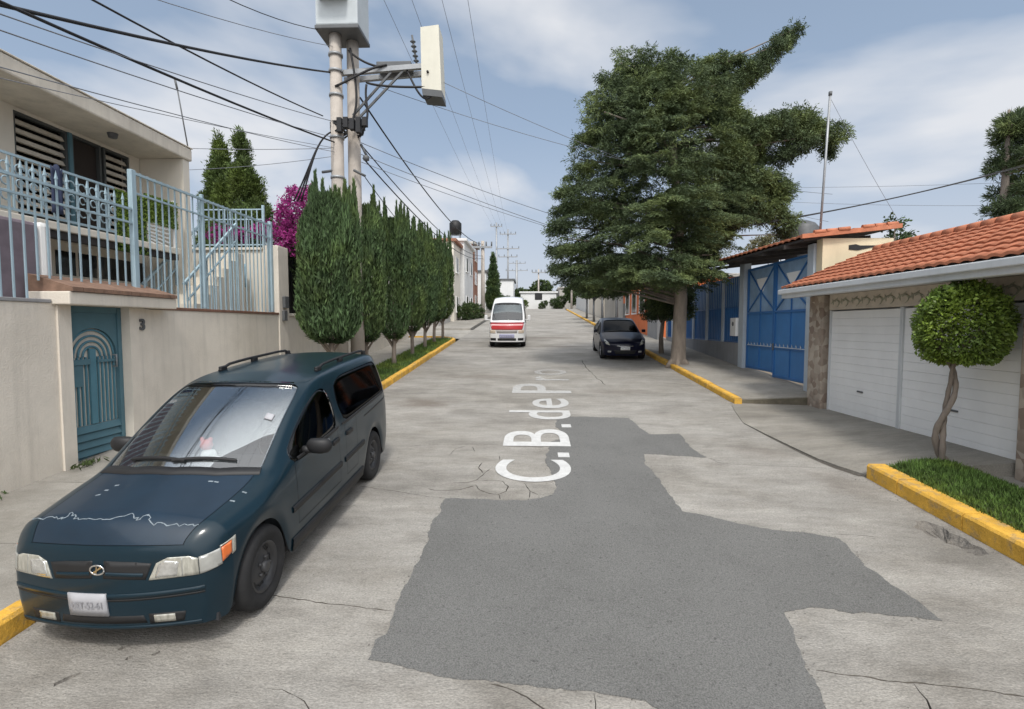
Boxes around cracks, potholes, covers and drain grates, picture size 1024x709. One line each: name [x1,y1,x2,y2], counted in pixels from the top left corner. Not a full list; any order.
crack [817,670,1024,709]
crack [273,595,391,611]
pothole [913,520,989,556]
crack [492,684,545,709]
crack [362,444,541,498]
